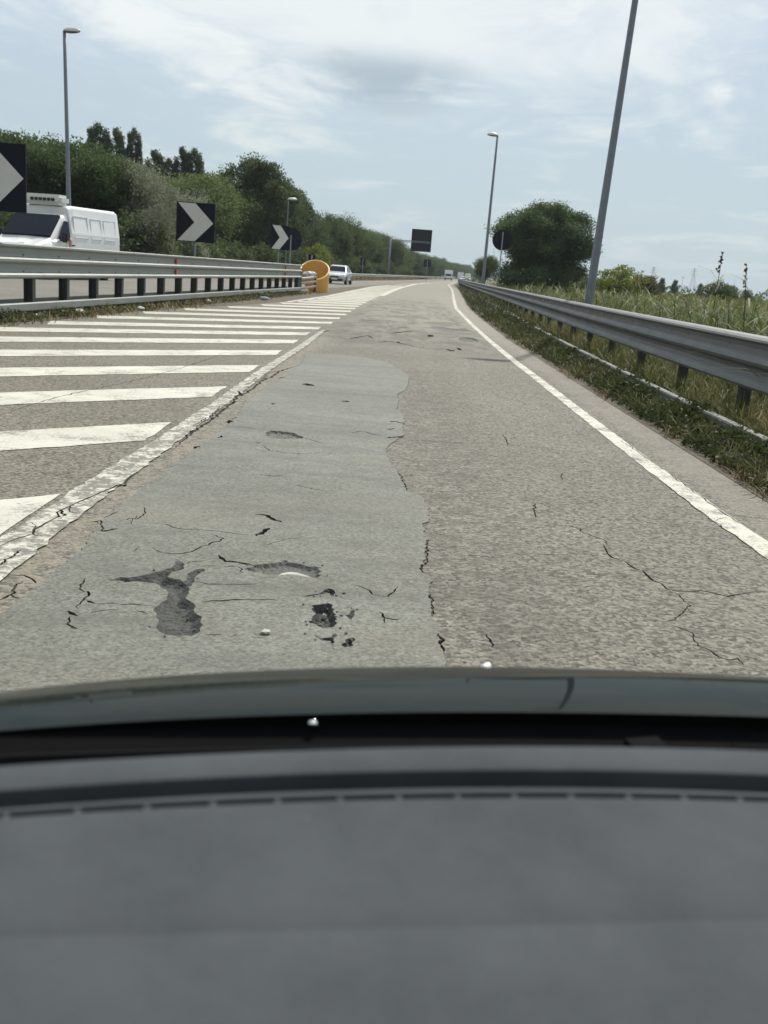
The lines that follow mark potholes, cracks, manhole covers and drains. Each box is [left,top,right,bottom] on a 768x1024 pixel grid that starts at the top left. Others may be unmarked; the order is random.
pothole [302,603,343,629]
pothole [265,431,304,439]
crack [0,472,139,600]
crack [66,578,151,629]
crack [324,320,461,351]
pothole [106,560,205,637]
pothole [245,560,328,579]
crack [398,473,445,652]
crack [92,507,290,602]
crack [530,524,768,665]
